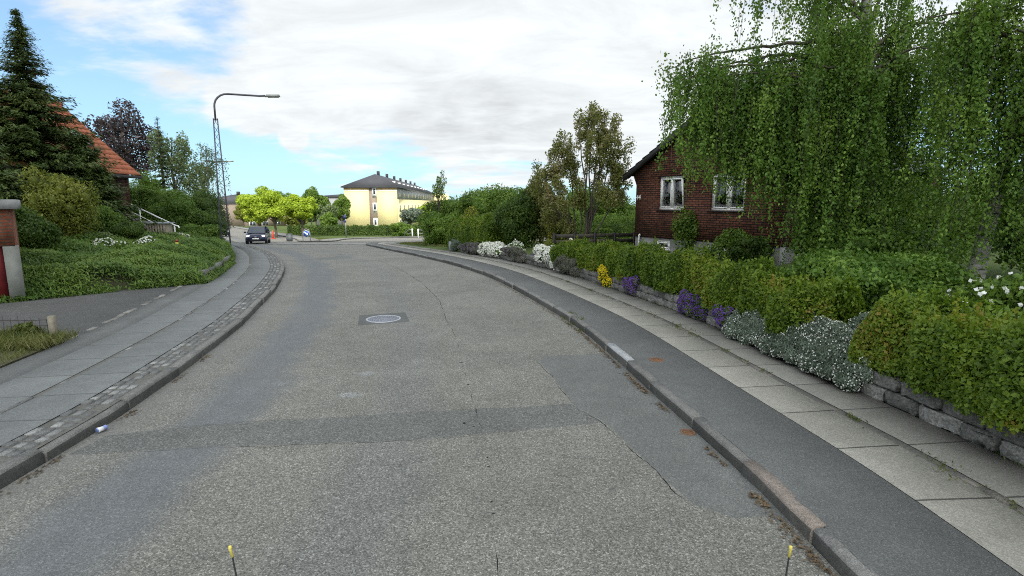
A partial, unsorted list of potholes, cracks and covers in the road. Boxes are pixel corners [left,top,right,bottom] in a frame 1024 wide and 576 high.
manhole cover [366,315,401,323]
